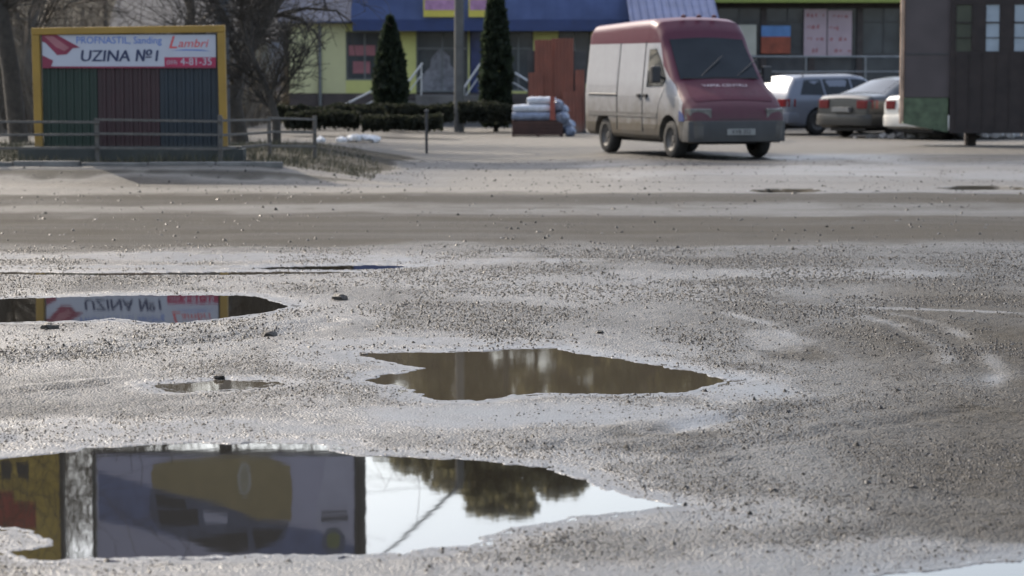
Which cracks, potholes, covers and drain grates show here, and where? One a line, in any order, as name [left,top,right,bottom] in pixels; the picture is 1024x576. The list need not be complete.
pothole [353,347,743,402]
pothole [0,441,683,563]
pothole [0,294,297,324]
